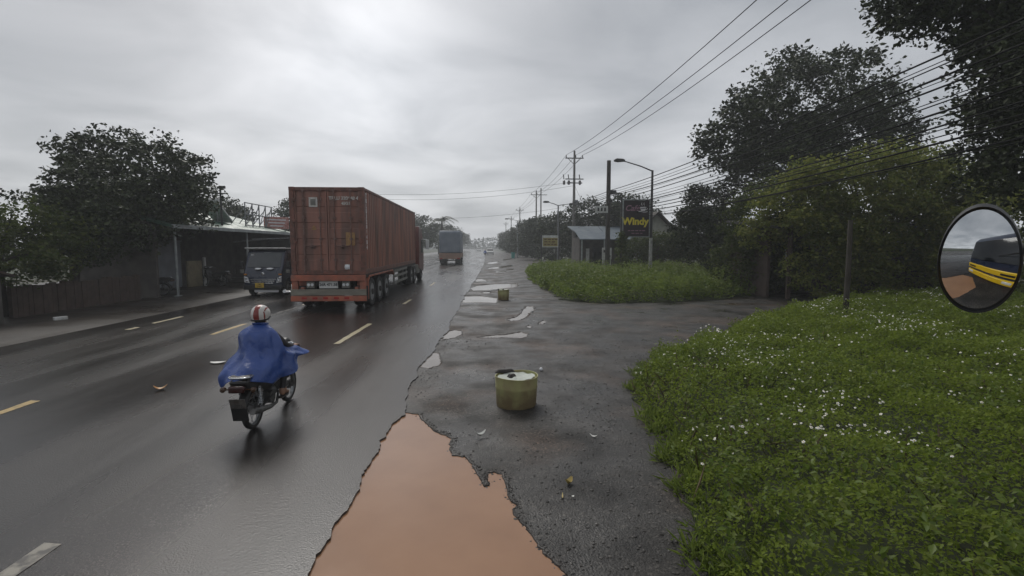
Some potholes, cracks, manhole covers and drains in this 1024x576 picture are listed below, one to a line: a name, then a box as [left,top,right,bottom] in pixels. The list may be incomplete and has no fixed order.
pothole [309,412,570,576]
